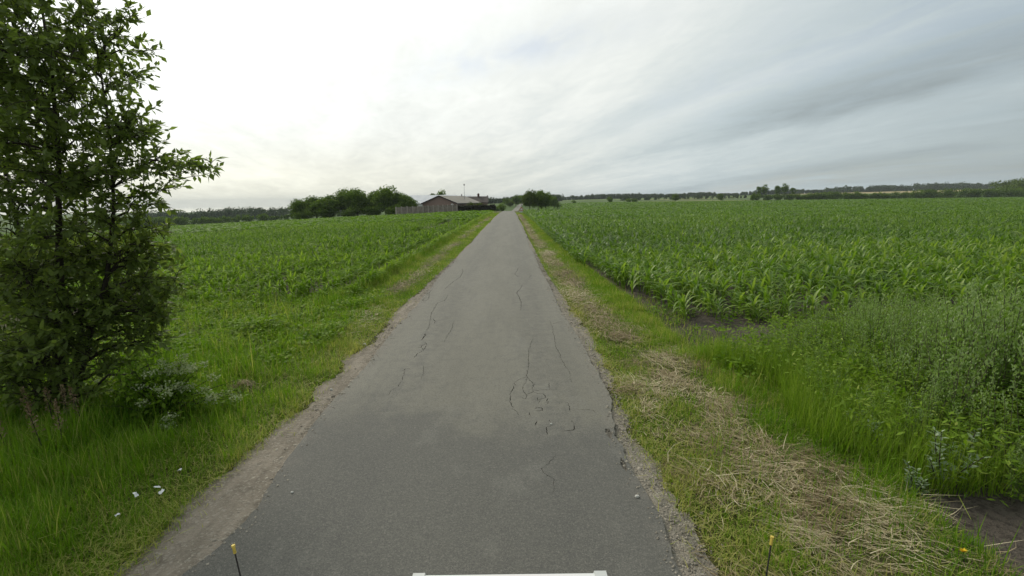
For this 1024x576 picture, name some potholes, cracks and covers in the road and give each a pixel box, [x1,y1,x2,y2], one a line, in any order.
crack [510,321,595,434]
crack [389,269,463,394]
